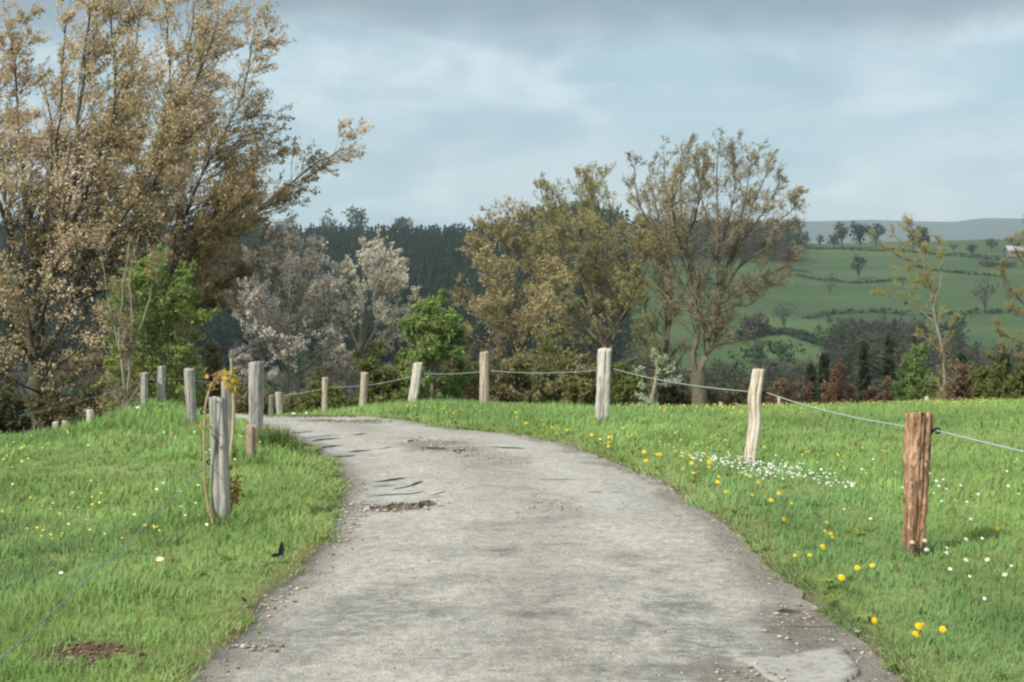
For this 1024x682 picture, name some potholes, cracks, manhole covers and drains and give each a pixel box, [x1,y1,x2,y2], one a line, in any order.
pothole [370,501,437,511]
crack [362,478,447,505]
